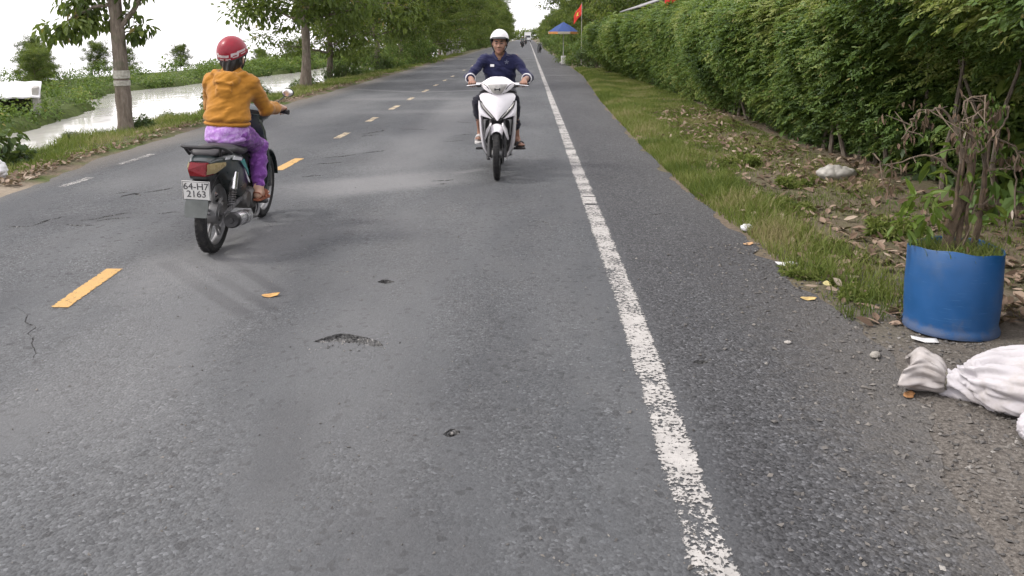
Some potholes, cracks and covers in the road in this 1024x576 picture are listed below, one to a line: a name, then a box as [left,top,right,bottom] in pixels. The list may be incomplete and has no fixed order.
crack [15,306,37,360]
crack [8,187,175,227]
pothole [290,334,401,354]
